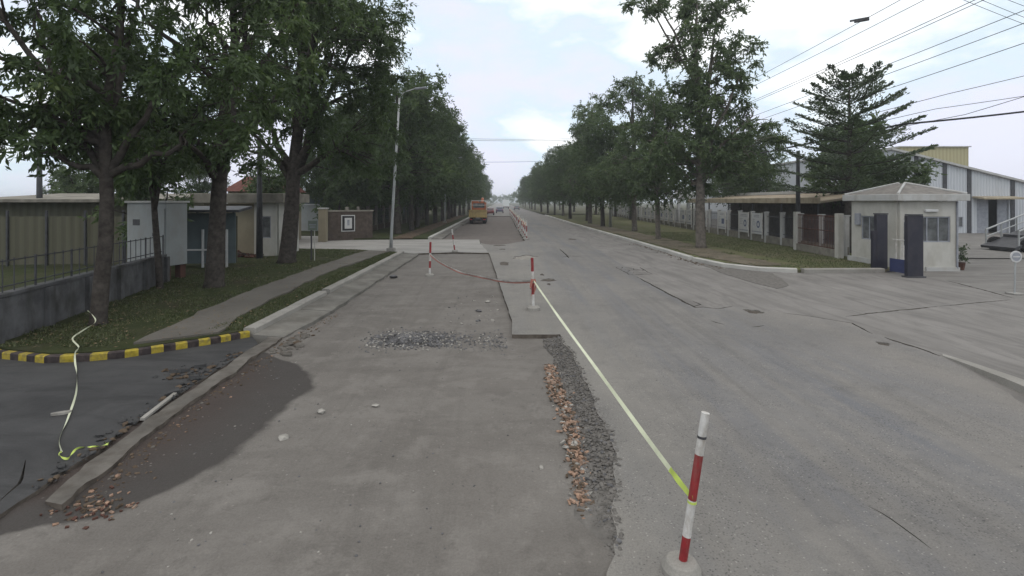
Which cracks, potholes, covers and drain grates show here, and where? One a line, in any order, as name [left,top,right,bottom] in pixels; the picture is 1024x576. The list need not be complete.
crack [858,505,930,548]
crack [1,462,26,500]
